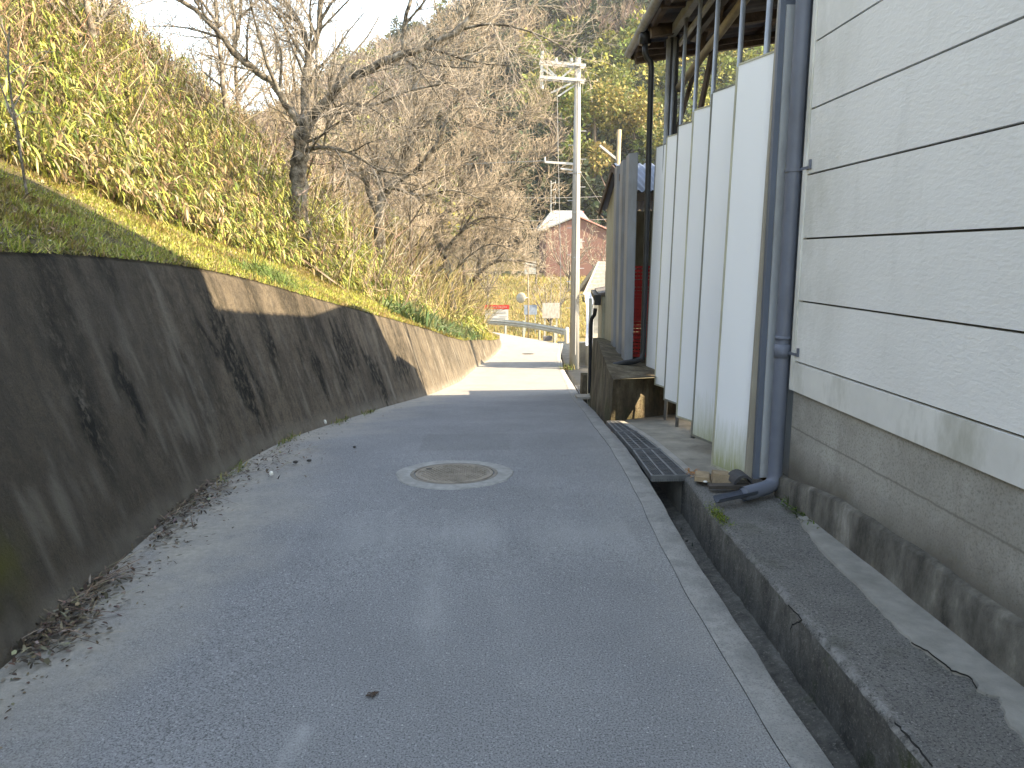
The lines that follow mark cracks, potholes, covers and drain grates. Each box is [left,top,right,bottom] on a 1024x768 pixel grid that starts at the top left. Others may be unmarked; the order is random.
crack [911,642,977,689]
crack [894,721,933,767]
drain grate [606,420,636,436]
drain grate [617,431,660,453]
manhole cover [395,460,514,490]
drain grate [632,449,691,482]
